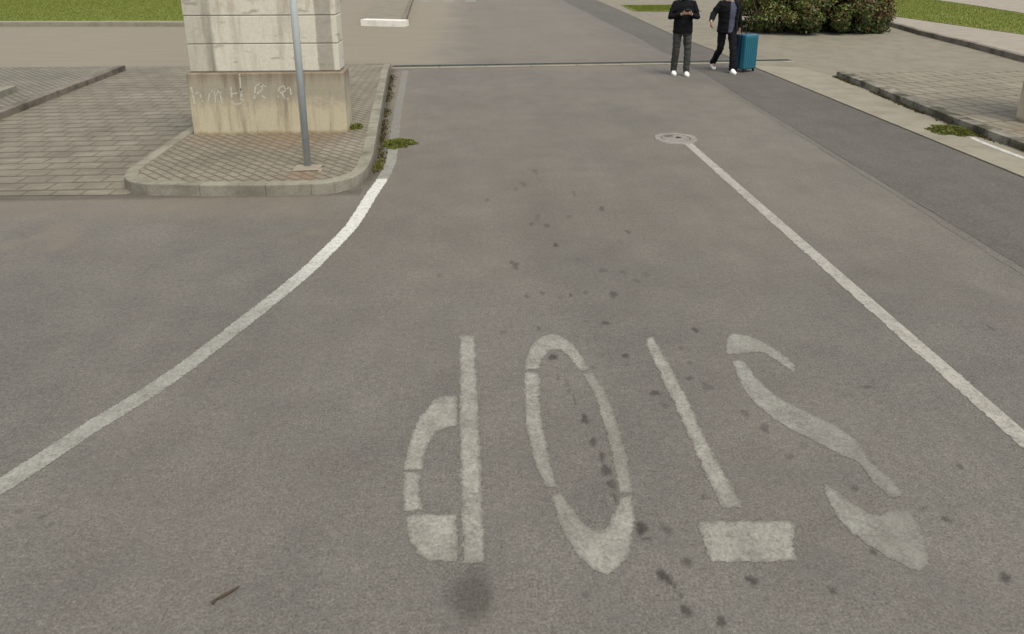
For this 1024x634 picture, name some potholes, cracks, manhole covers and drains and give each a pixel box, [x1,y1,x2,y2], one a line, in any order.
manhole cover [654,133,698,144]
